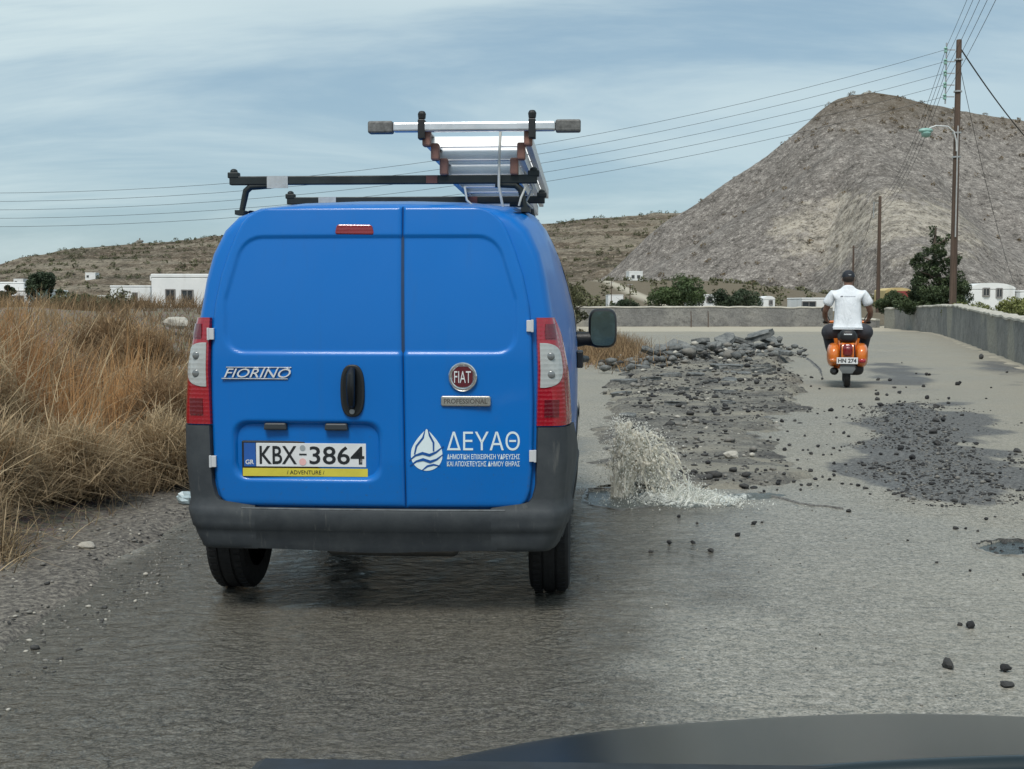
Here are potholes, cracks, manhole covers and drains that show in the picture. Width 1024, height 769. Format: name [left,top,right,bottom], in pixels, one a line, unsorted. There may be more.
crack [793,352,822,376]
crack [760,492,843,510]
pothole [581,487,651,511]
pothole [971,537,1024,557]
